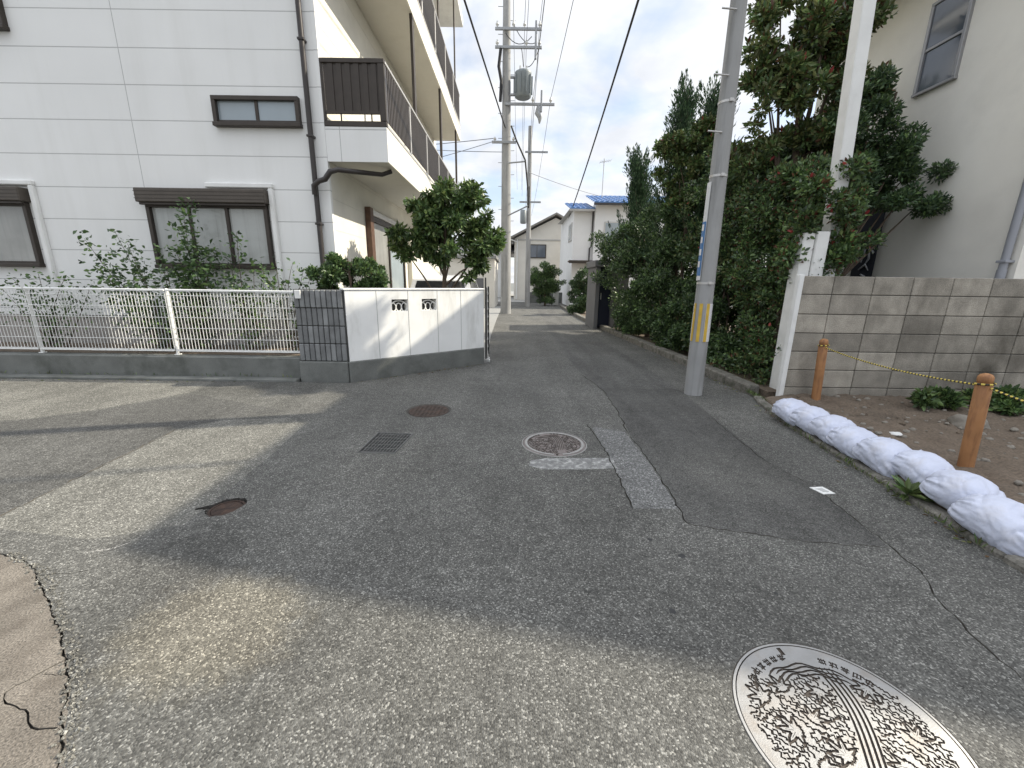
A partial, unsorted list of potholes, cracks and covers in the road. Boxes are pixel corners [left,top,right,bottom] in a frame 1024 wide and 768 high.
drain grate [356,432,414,454]
manhole cover [406,404,451,418]
crack [0,552,94,768]
utility cover [207,500,246,517]
crack [582,375,1023,680]
manhole cover [521,431,587,457]
manhole cover [731,642,980,768]
